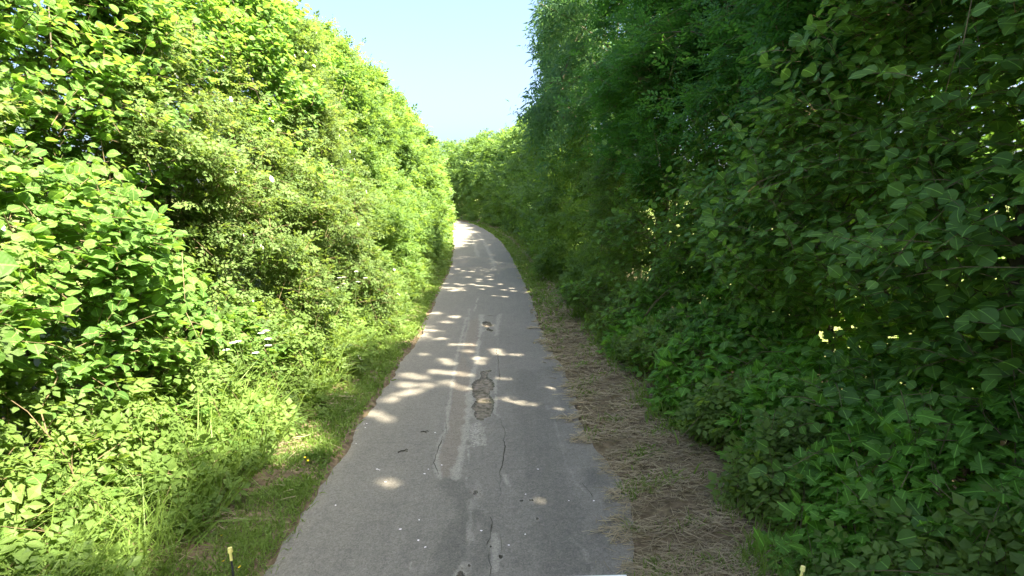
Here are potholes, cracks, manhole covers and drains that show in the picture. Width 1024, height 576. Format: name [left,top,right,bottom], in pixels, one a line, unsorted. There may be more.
pothole [471,370,495,421]
